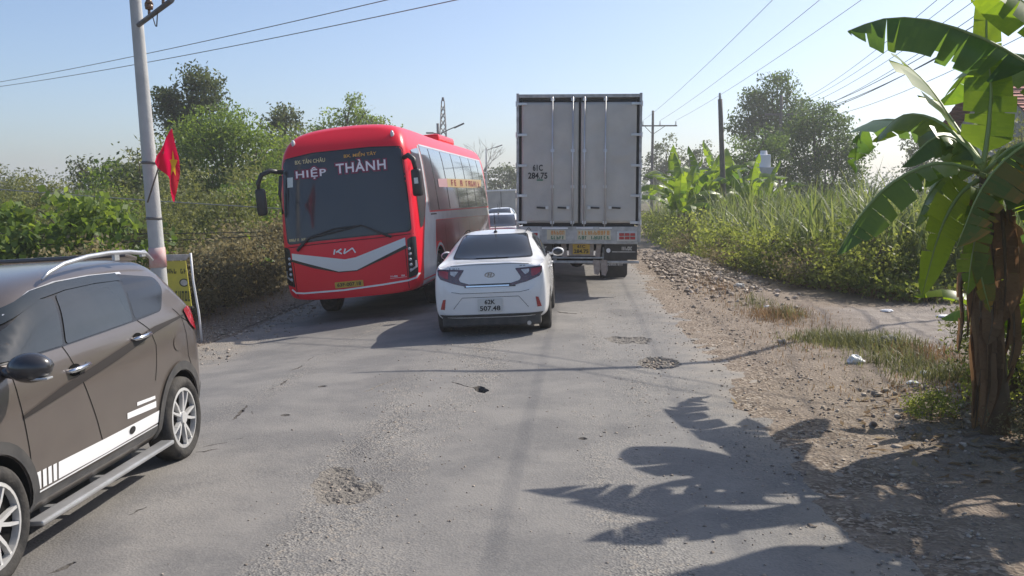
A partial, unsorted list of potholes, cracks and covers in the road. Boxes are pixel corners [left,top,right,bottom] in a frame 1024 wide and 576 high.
pothole [310,467,384,506]
pothole [604,336,652,344]
pothole [637,357,681,370]
